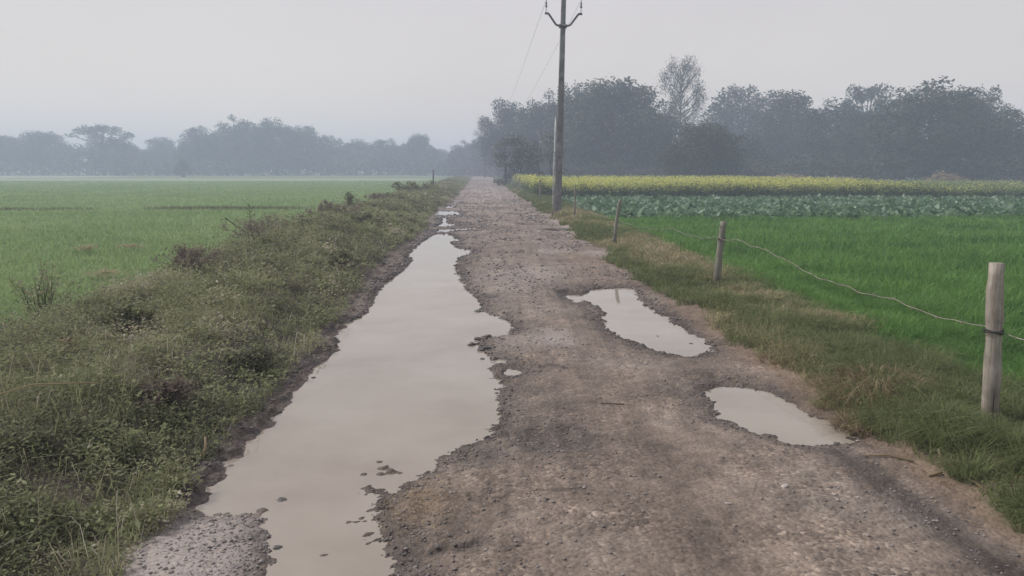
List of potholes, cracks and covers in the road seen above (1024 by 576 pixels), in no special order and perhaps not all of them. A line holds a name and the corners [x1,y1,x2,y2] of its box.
pothole [565,285,721,358]
pothole [499,366,530,377]
pothole [696,383,865,448]
pothole [178,234,521,576]
